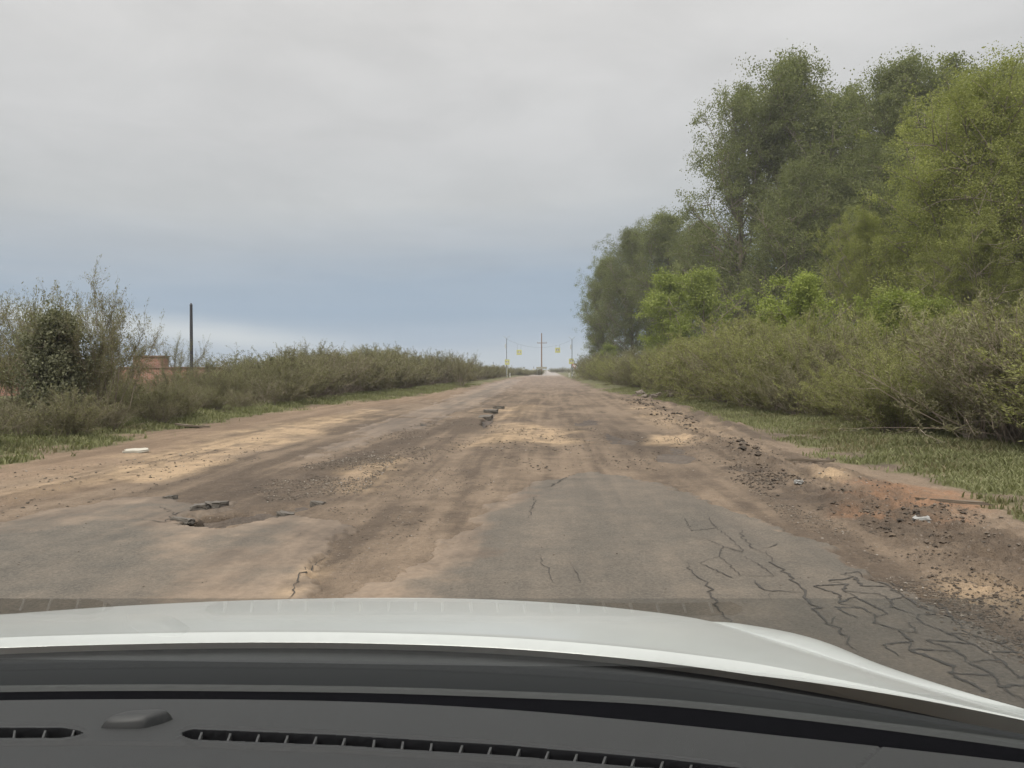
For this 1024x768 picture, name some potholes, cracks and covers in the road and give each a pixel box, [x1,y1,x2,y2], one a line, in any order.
crack [288,558,324,599]
crack [682,517,1024,700]
pothole [204,507,308,528]
